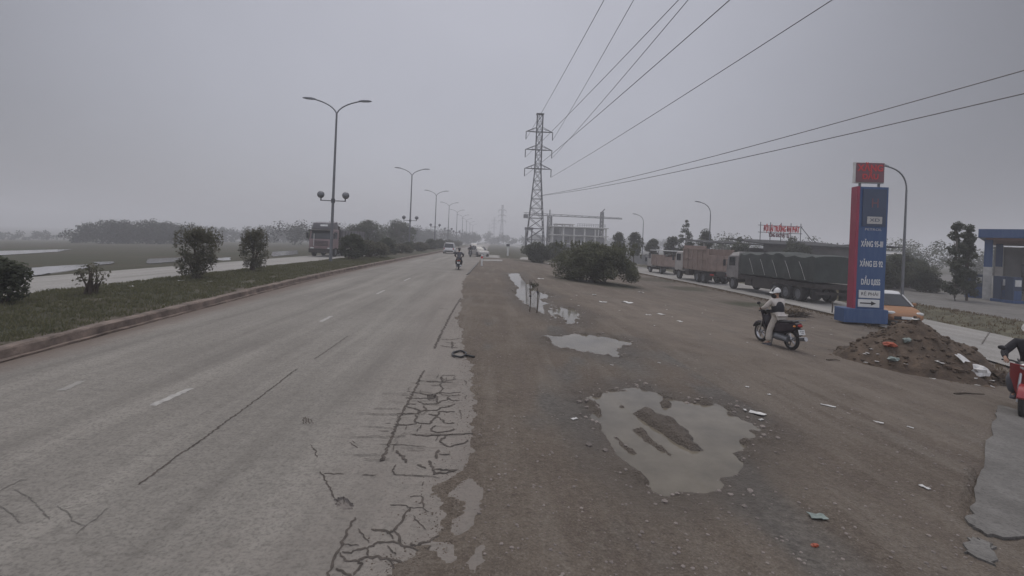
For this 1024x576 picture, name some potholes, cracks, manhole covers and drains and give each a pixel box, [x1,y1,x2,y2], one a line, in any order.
crack [358,370,473,485]
crack [138,336,348,485]
pothole [544,333,637,357]
crack [433,298,461,349]
pothole [507,273,564,320]
crack [0,479,107,534]
pothole [586,387,762,496]
crack [326,495,440,576]
pothole [554,306,581,324]
